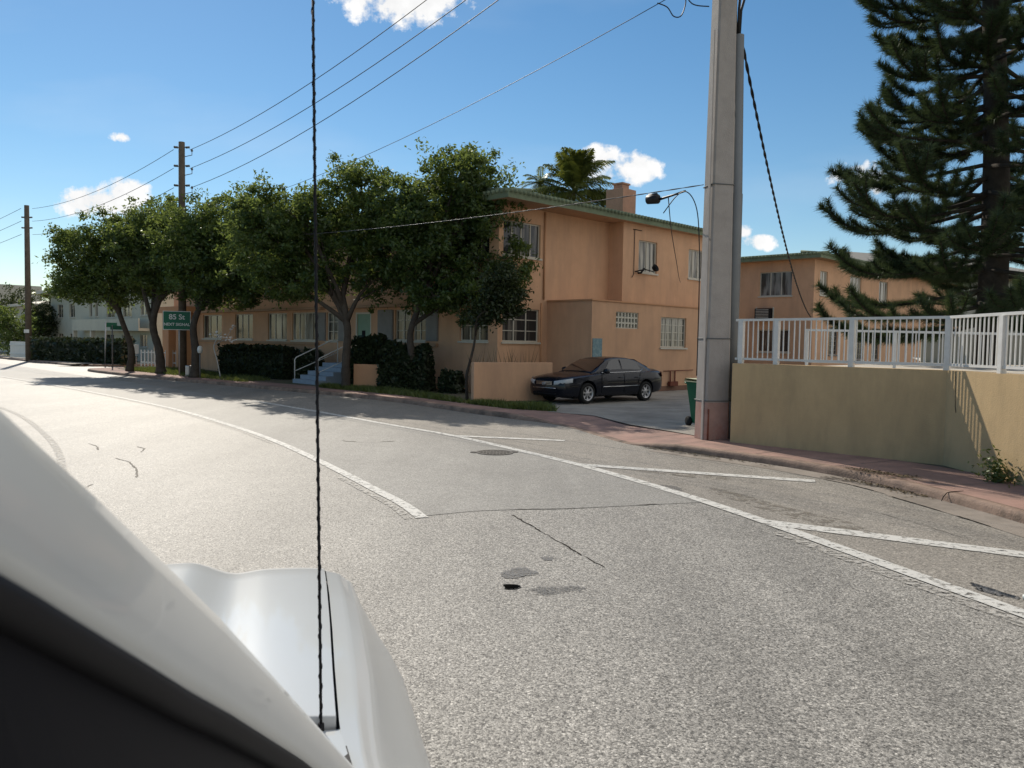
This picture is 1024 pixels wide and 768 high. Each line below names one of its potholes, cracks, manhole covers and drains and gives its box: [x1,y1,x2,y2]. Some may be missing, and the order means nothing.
crack [513,515,604,567]
